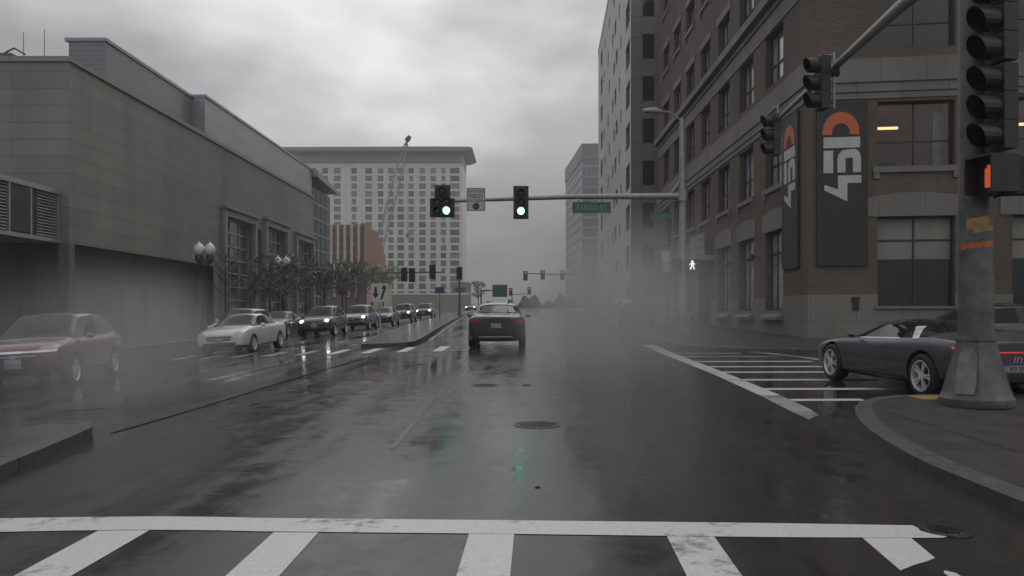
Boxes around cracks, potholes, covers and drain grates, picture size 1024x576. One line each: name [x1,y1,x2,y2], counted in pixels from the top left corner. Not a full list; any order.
utility cover [915,523,975,538]
manhole cover [514,421,561,429]
